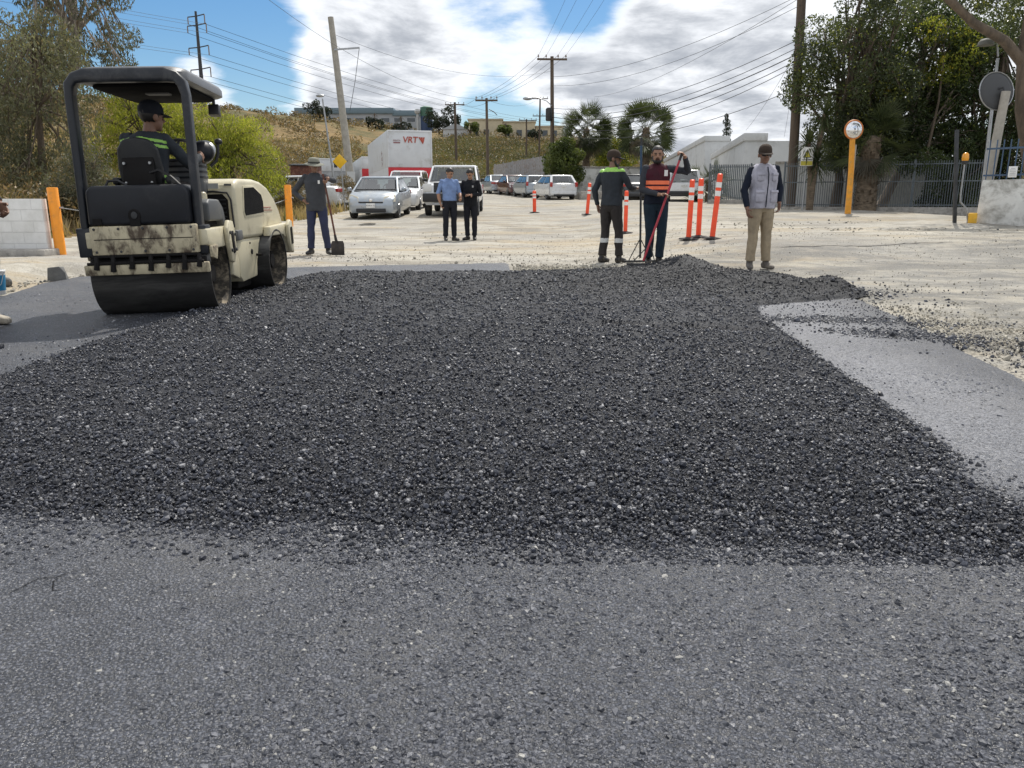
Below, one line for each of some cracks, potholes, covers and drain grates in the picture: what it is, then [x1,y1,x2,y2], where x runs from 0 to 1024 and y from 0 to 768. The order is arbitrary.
crack [8,572,70,594]
